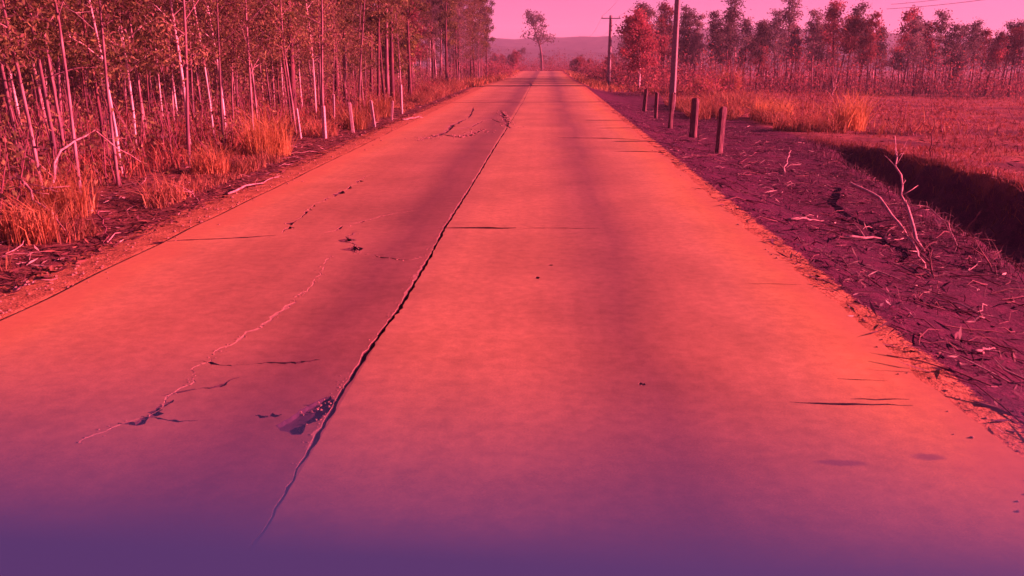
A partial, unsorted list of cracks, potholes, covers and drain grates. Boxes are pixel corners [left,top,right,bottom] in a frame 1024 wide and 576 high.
crack [77,83,600,455]
pothole [276,395,335,435]
